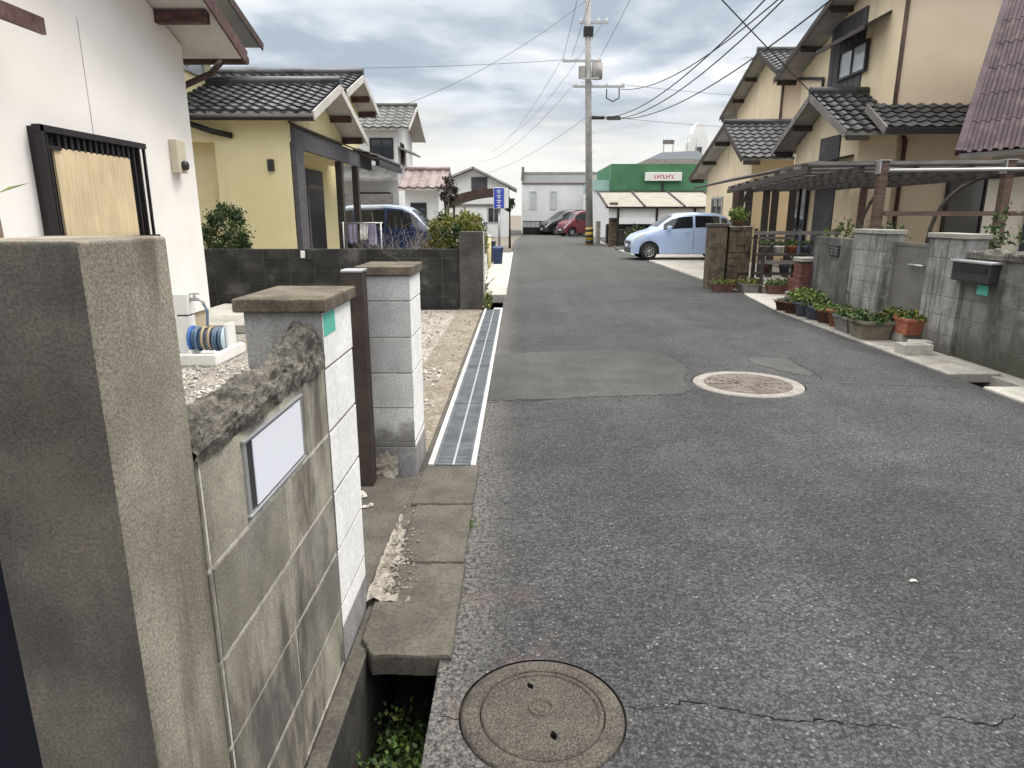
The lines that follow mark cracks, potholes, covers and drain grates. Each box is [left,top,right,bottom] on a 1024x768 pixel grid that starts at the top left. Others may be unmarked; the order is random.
crack [940,712,1023,727]
drain grate [468,340,495,365]
manhole cover [459,661,626,768]
drain grate [455,365,490,403]
drain grate [477,322,498,340]
drain grate [483,309,501,322]
drain grate [434,403,482,466]
manhole cover [692,371,805,398]
crack [628,700,917,731]
